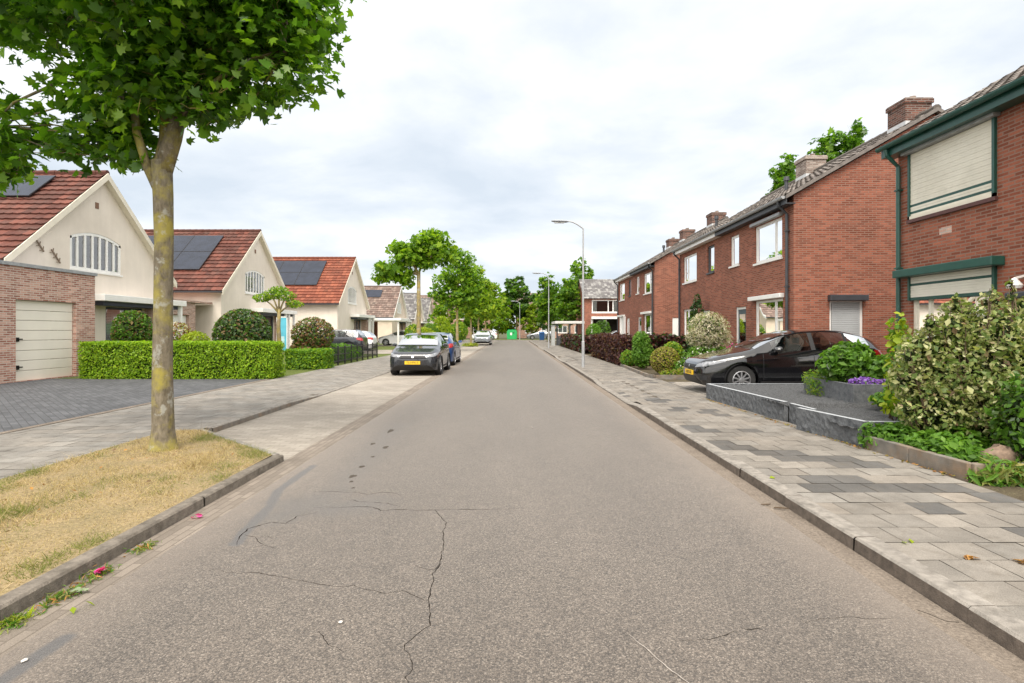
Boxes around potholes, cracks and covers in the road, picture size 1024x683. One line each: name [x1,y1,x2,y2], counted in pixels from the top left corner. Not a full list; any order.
crack [204,491,527,683]
